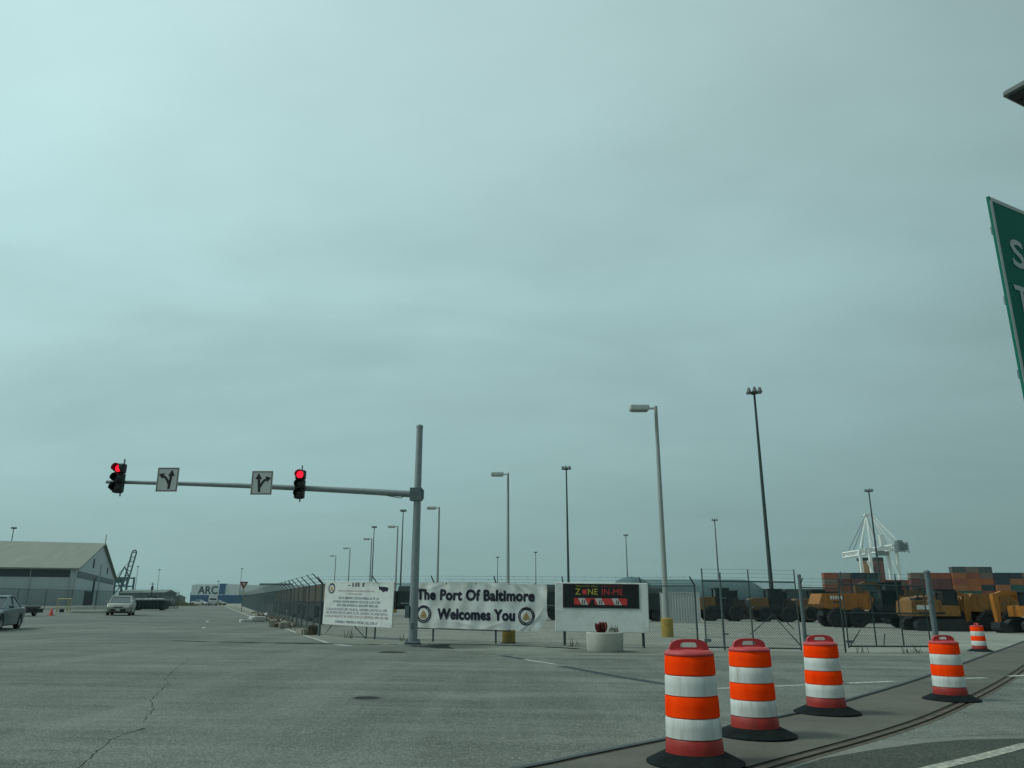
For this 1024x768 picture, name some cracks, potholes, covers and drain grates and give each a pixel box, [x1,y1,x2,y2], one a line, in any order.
crack [78,660,187,768]
